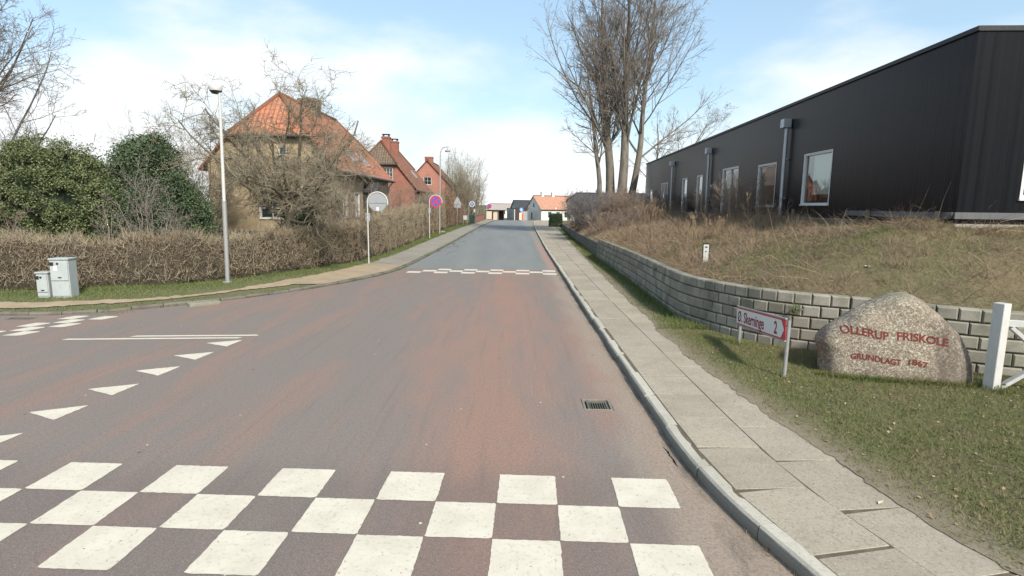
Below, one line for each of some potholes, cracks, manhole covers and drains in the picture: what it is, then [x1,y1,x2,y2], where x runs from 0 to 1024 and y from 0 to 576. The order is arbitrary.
drain grate [581,399,613,410]
